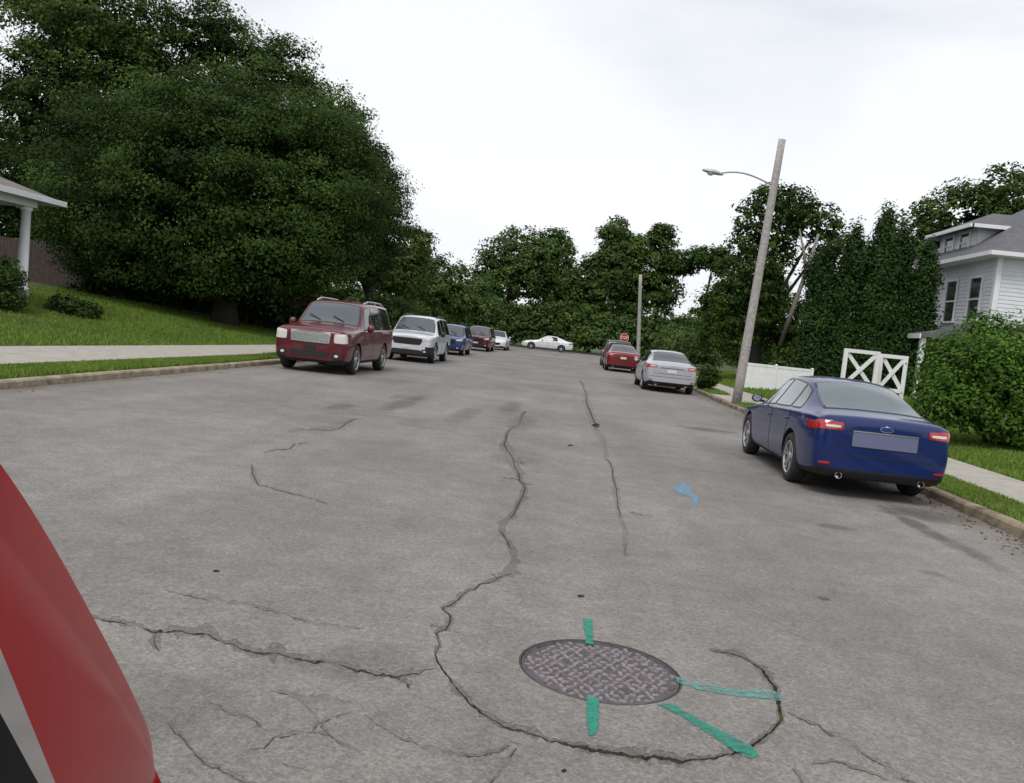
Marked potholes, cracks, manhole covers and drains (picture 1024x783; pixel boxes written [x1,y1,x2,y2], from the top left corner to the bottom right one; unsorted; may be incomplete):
crack [92,411,915,783]
manhole cover [519,639,682,705]
